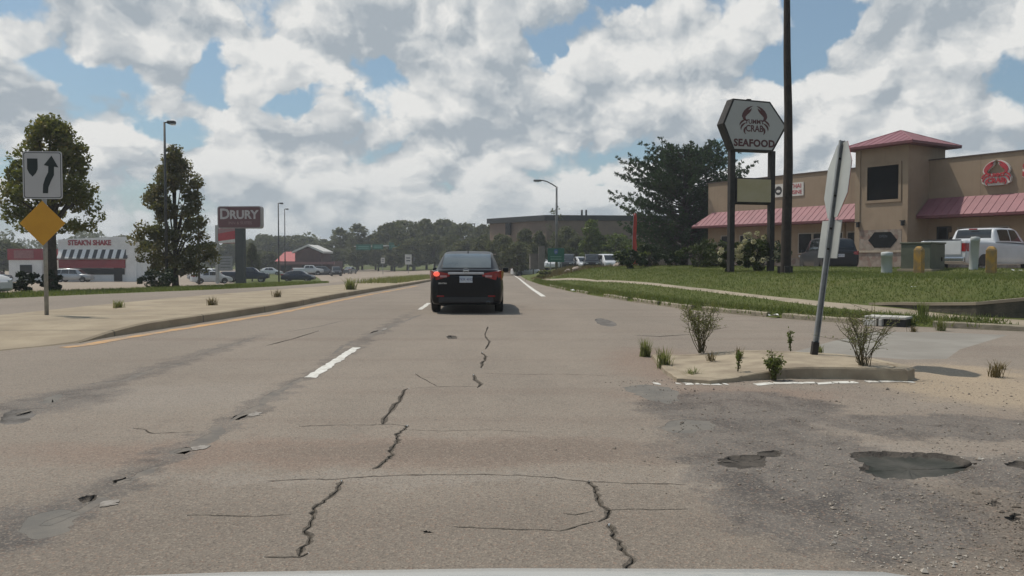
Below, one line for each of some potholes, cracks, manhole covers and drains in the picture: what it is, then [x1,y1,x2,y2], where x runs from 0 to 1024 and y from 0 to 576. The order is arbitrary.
pothole [0,409,36,424]
pothole [78,495,97,503]
pothole [1004,460,1024,469]
pothole [850,451,977,480]
crack [194,327,683,569]
pothole [717,455,768,469]
